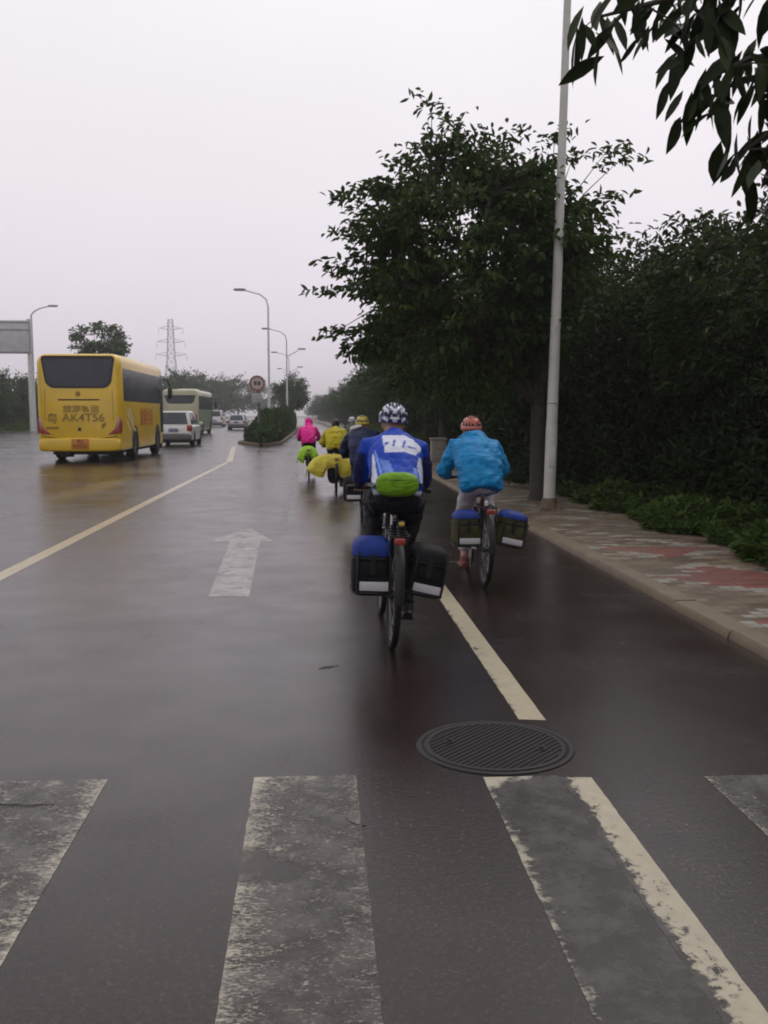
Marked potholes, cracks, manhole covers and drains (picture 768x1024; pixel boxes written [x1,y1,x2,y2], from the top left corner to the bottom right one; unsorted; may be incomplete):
manhole cover [416,721,575,776]
